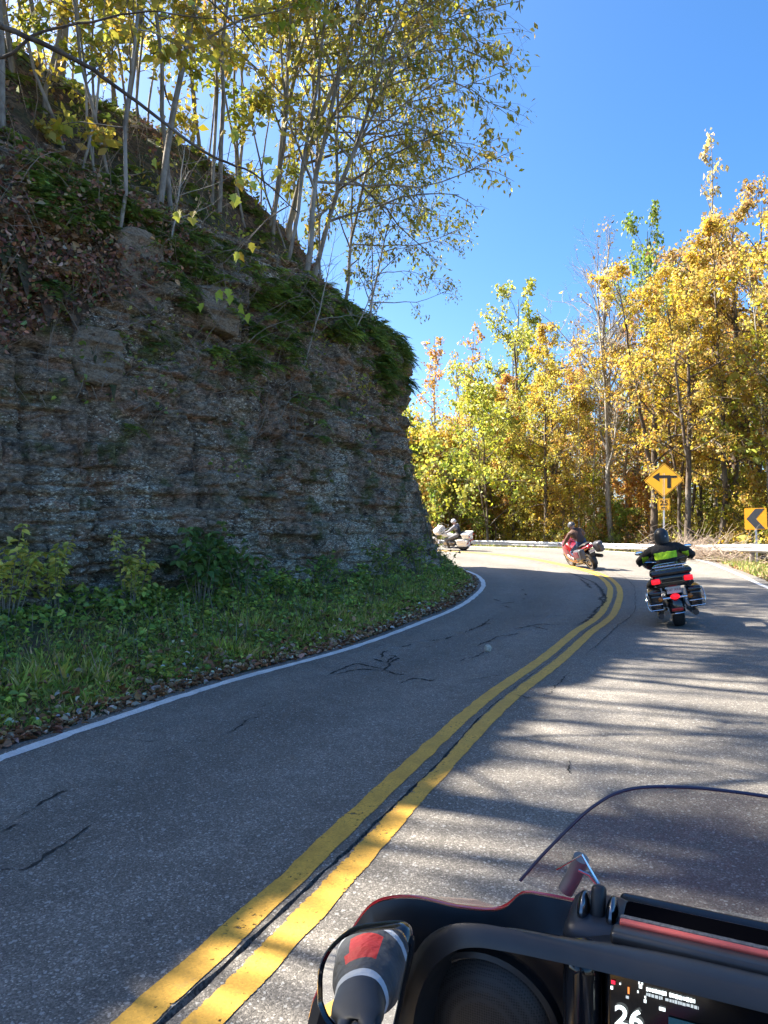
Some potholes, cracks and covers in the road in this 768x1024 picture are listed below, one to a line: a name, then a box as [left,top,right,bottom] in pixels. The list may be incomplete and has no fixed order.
crack [5,790,67,830]
crack [1,825,90,870]
crack [327,644,433,684]
